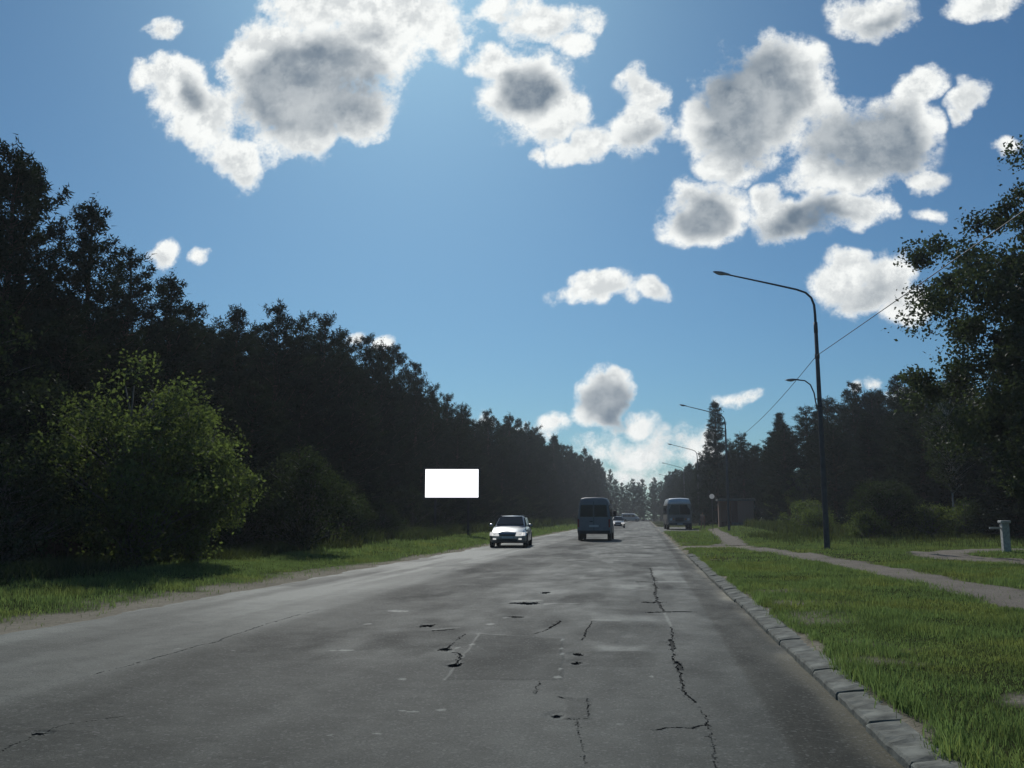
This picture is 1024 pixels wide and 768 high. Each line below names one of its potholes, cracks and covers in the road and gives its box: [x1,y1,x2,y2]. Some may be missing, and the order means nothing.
crack [556,696,591,764]
crack [431,629,466,663]
crack [641,568,719,768]
